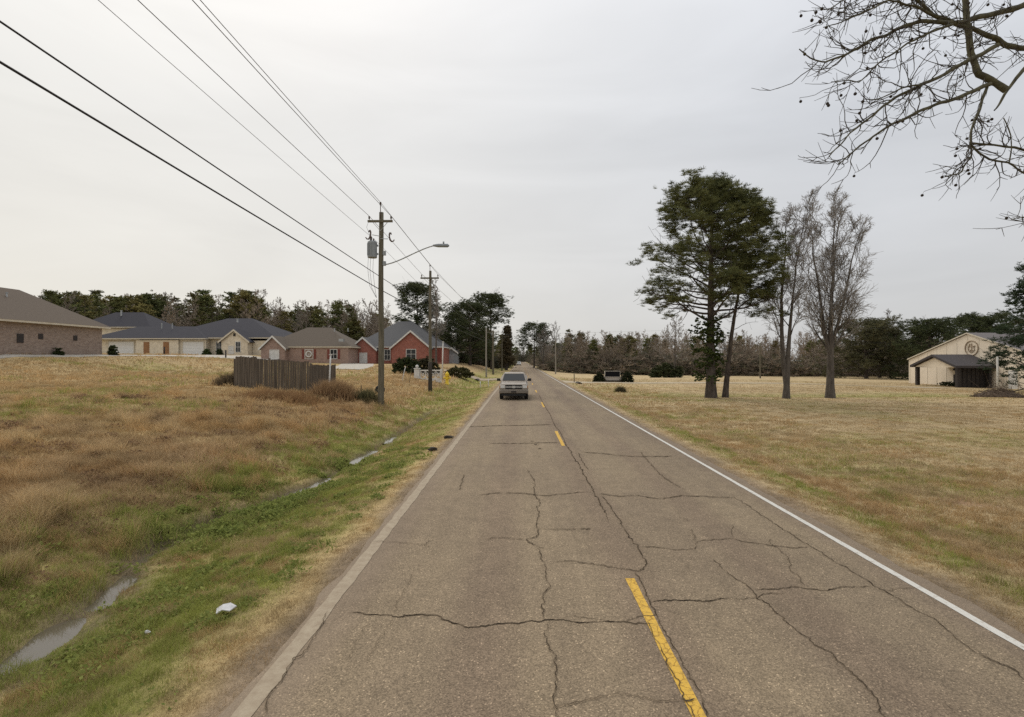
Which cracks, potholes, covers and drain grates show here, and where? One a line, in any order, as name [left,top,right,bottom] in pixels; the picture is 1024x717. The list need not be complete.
crack [347,452,1023,717]
crack [262,612,327,715]
